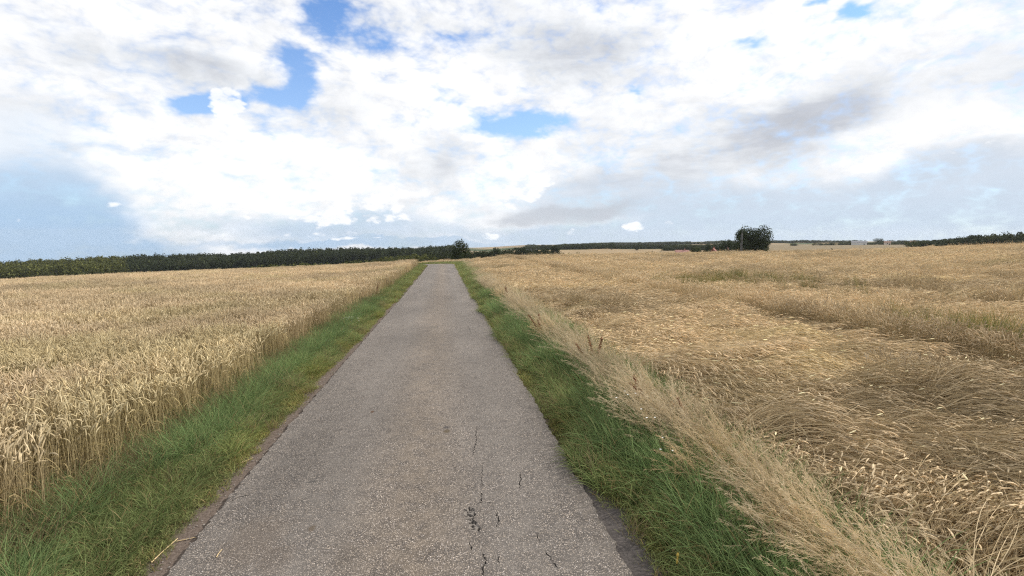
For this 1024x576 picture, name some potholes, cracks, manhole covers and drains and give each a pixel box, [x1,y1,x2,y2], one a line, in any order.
crack [469,427,500,576]
